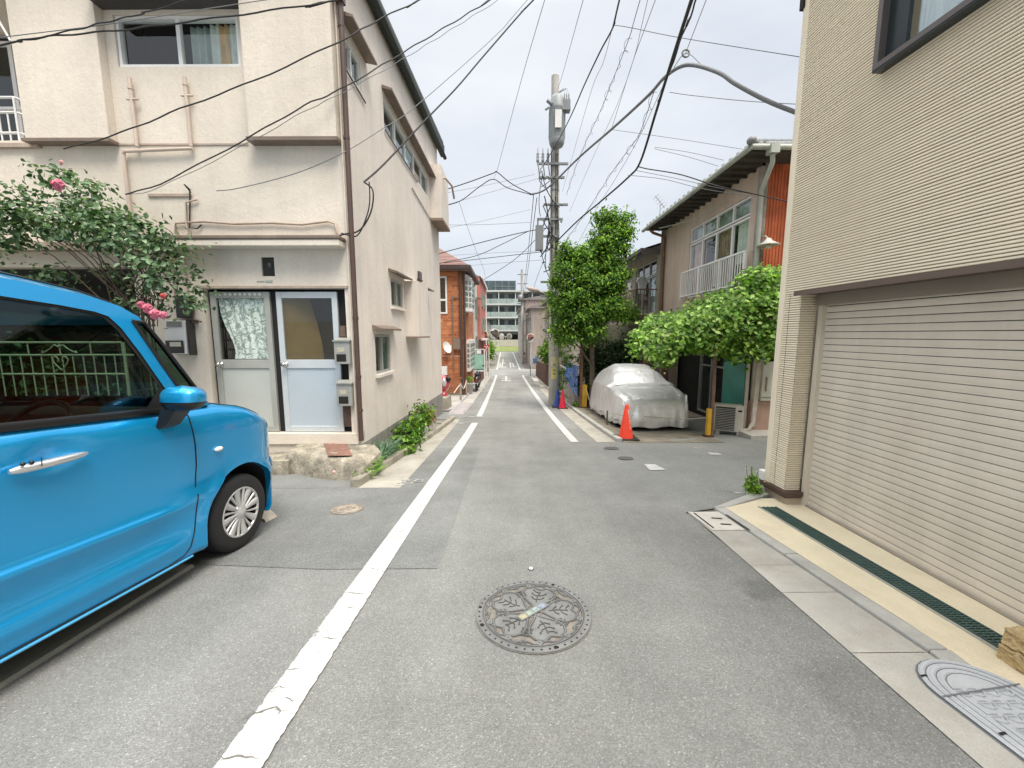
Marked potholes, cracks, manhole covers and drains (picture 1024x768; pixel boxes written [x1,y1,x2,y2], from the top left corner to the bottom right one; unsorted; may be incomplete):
manhole cover [475,580,592,654]
manhole cover [915,659,1024,762]
drain grate [758,506,1003,651]
manhole cover [330,503,364,515]
